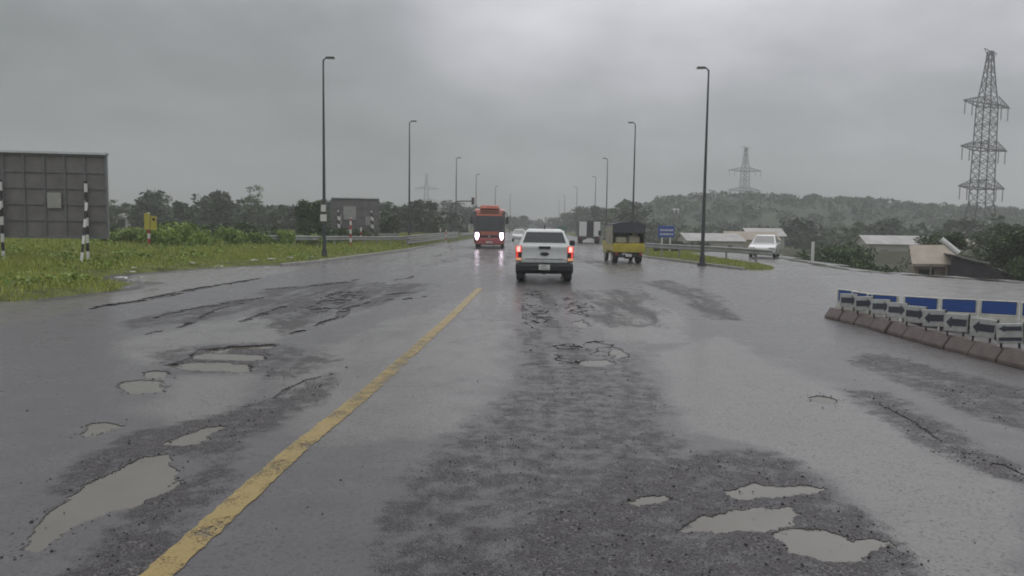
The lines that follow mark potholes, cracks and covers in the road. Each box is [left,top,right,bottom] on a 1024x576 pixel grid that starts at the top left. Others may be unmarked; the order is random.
crack [521,291,595,329]
pothole [676,506,802,533]
crack [883,407,1024,476]
pothole [771,528,897,563]
pothole [724,482,828,500]
pothole [116,380,169,394]
crack [243,374,333,407]
crack [145,276,426,335]
pothole [21,454,184,552]
pothole [79,422,125,437]
pothole [808,395,837,404]
